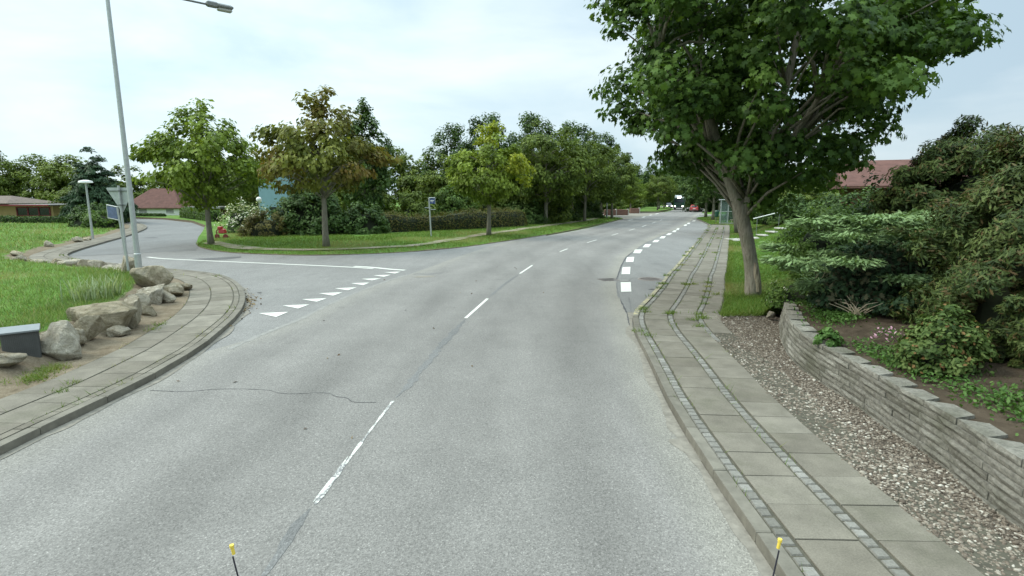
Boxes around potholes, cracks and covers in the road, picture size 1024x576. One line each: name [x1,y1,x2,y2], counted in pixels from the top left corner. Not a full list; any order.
crack [154,389,362,403]
